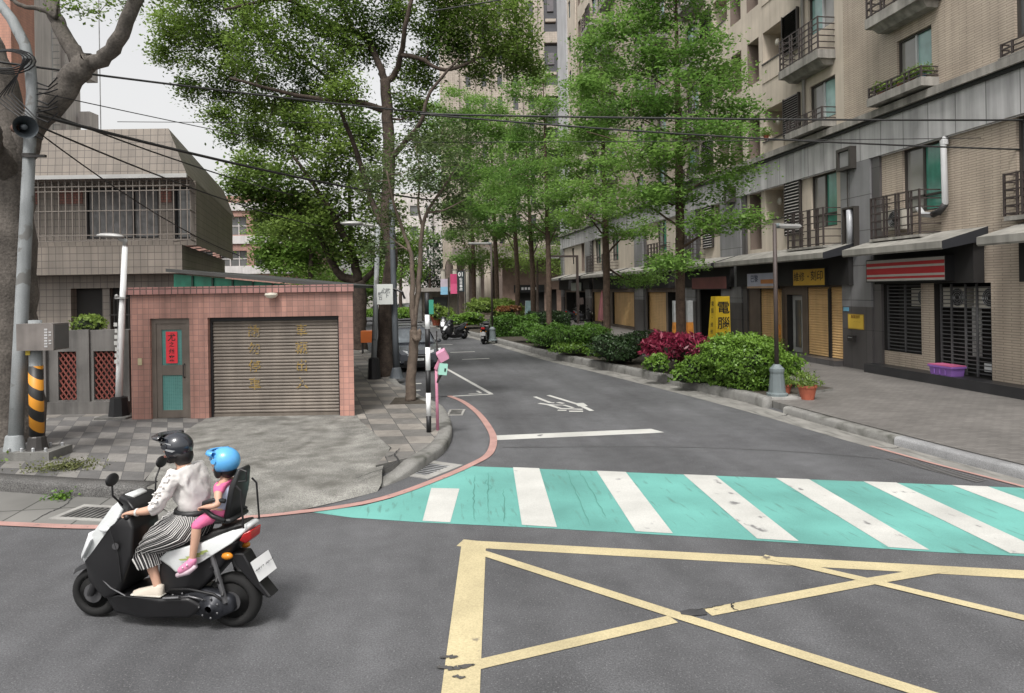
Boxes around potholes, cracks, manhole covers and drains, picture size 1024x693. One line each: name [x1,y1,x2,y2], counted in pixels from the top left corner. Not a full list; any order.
crack [473,476,505,520]
drain grate [410,461,463,479]
drain grate [48,504,114,522]
crack [566,470,605,525]
